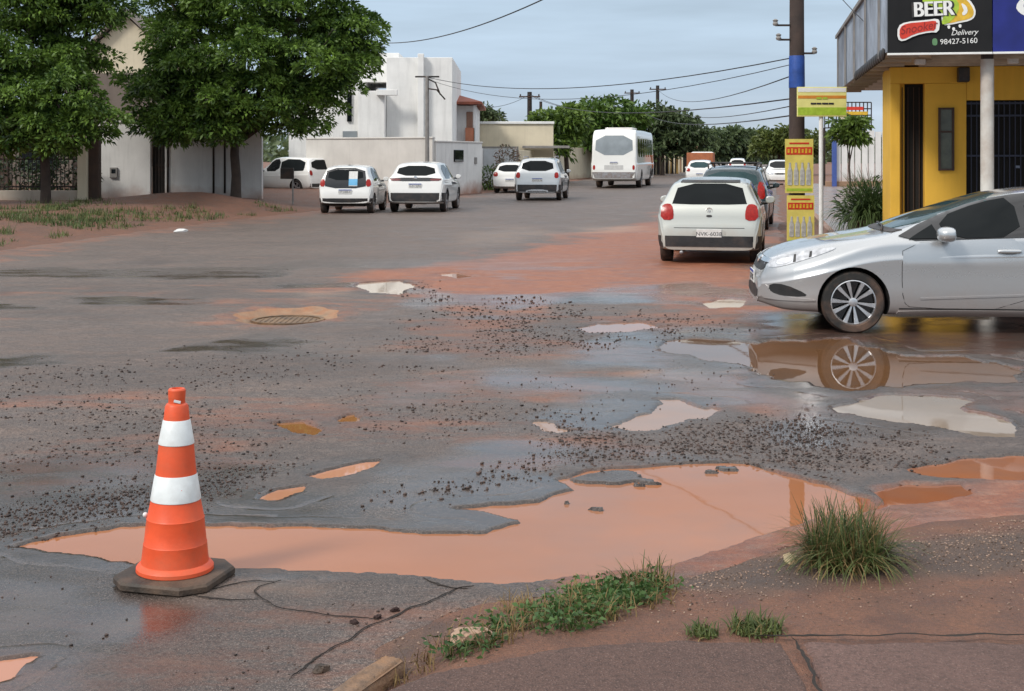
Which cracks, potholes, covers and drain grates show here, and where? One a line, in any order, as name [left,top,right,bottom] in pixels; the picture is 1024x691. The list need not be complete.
pothole [0,643,73,691]
pothole [803,388,1024,447]
pothole [869,445,1024,490]
pothole [830,473,1010,517]
pothole [533,317,696,338]
pothole [568,391,752,439]
pothole [239,412,360,441]
manhole cover [210,302,359,330]
pothole [321,277,444,298]
pothole [0,453,916,600]
crack [193,577,474,680]
pothole [615,332,1024,401]
